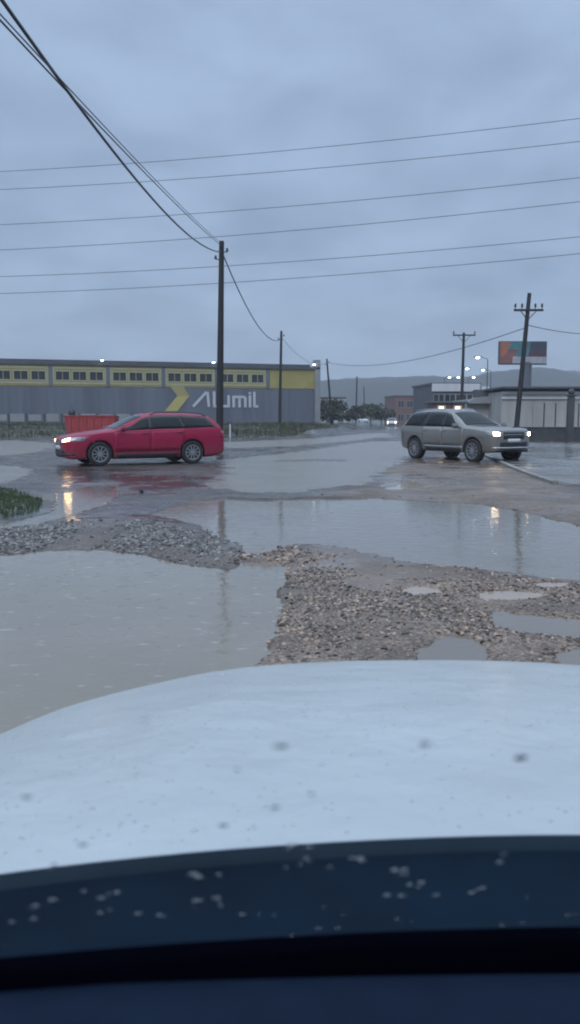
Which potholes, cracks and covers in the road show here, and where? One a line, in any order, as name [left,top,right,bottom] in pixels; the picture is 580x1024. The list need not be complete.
pothole [0,548,301,734]
pothole [386,582,453,595]
pothole [467,585,561,602]
pothole [475,606,580,639]
pothole [140,496,580,582]
pothole [397,629,511,661]
